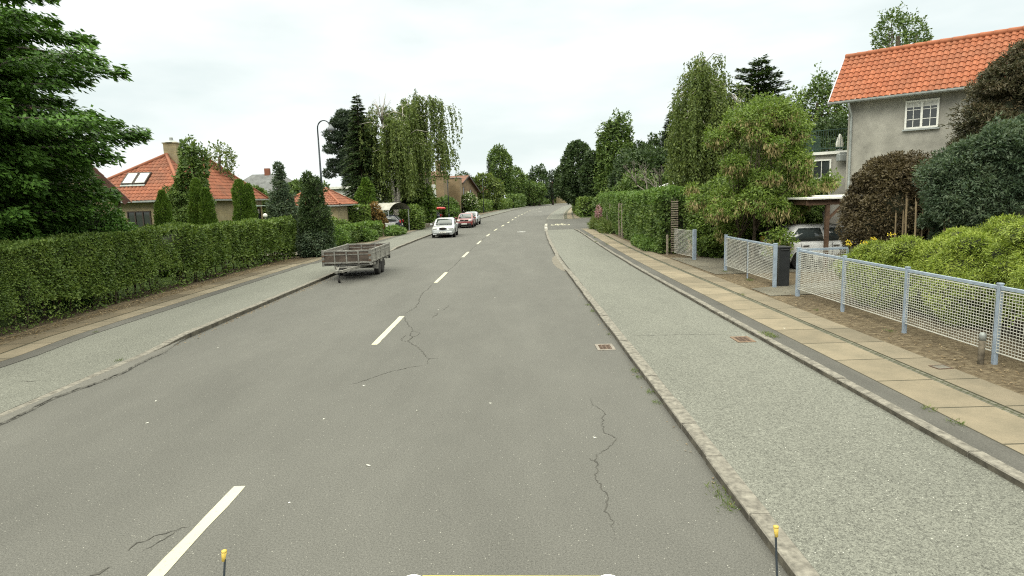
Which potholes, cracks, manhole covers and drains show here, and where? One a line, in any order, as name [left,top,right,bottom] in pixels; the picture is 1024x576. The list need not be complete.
crack [128,527,182,550]
crack [588,401,616,540]
crack [358,307,447,383]
